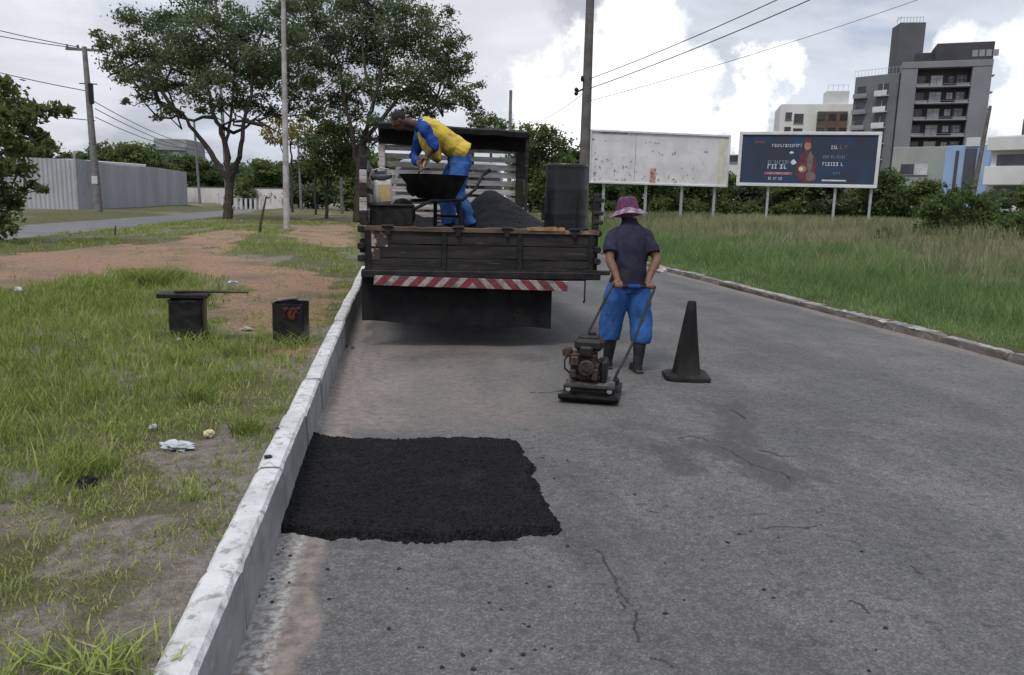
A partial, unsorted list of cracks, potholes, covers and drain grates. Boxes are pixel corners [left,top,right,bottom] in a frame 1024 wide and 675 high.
crack [594,549,674,668]
crack [677,436,792,481]
crack [847,600,870,614]
